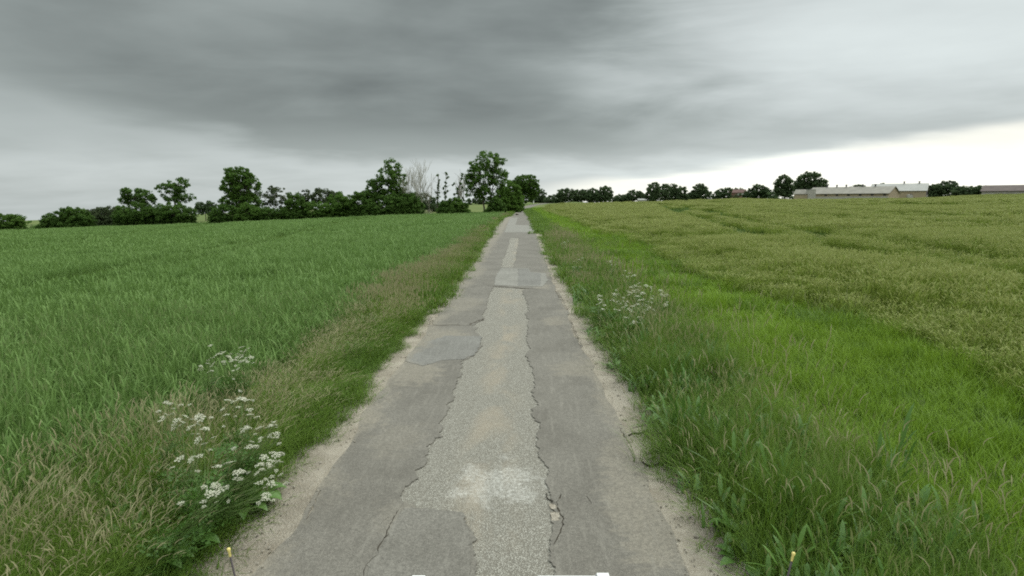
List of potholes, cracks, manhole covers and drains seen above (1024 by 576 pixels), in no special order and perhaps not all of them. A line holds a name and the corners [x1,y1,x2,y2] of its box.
crack [546,493,564,545]
crack [363,511,398,575]
